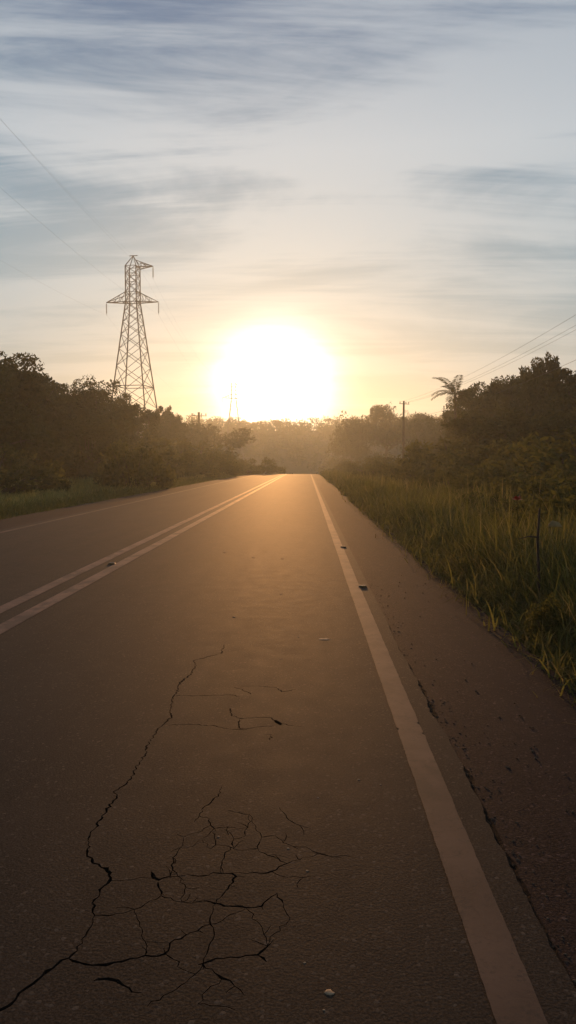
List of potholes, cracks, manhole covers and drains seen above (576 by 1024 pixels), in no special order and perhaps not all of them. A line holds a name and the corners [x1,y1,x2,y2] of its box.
crack [0,644,350,1011]
